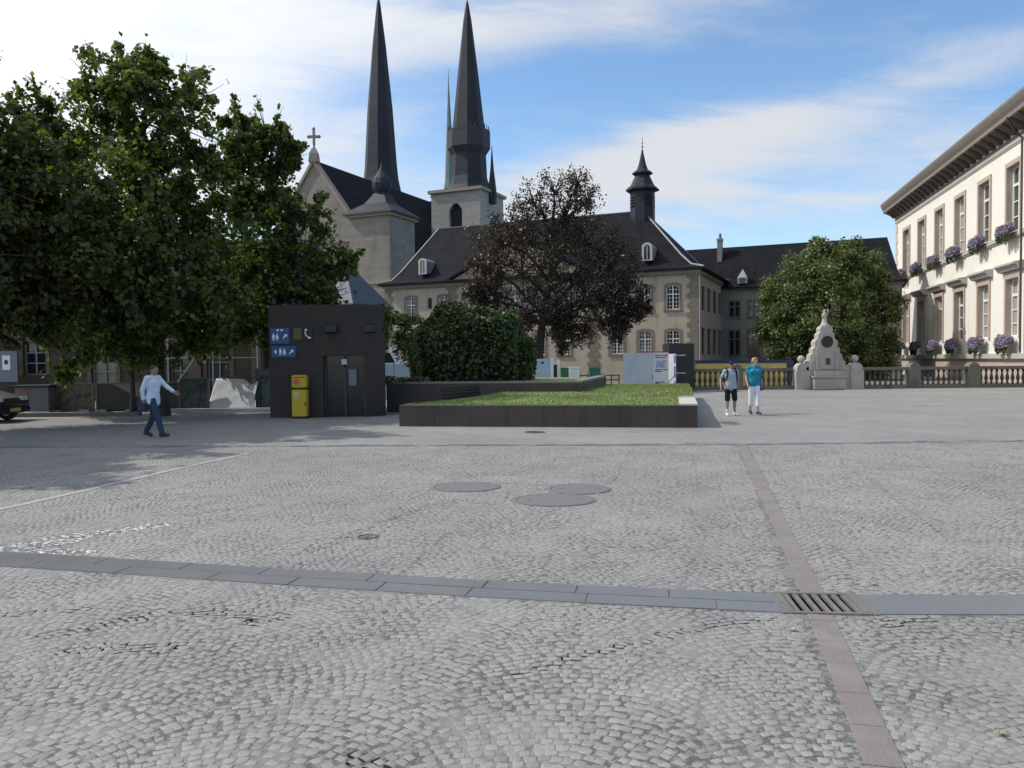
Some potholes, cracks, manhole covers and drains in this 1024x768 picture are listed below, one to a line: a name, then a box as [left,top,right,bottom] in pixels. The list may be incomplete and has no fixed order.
drain grate [767,591,880,616]
crack [37,610,203,639]
manhole cover [432,482,501,492]
manhole cover [513,493,596,507]
manhole cover [549,483,611,495]
